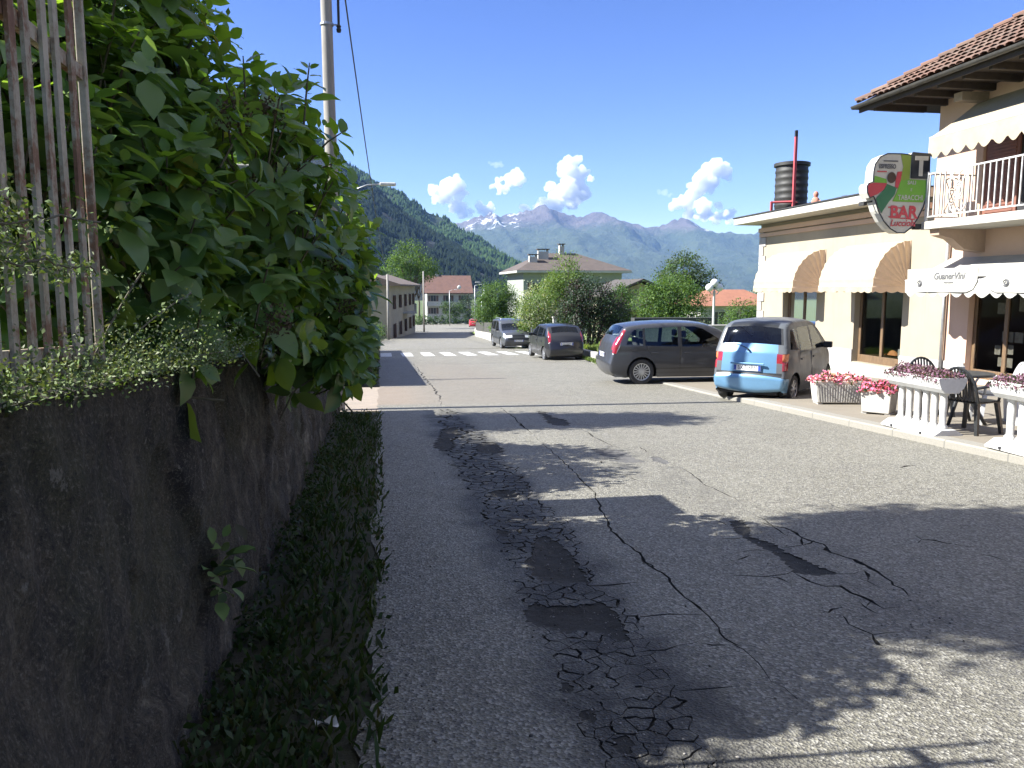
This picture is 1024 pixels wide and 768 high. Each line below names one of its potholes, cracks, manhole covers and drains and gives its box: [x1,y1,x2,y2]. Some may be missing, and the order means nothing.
pothole [729,520,836,576]
pothole [523,602,630,641]
crack [438,409,1003,768]
pothole [524,536,588,583]
